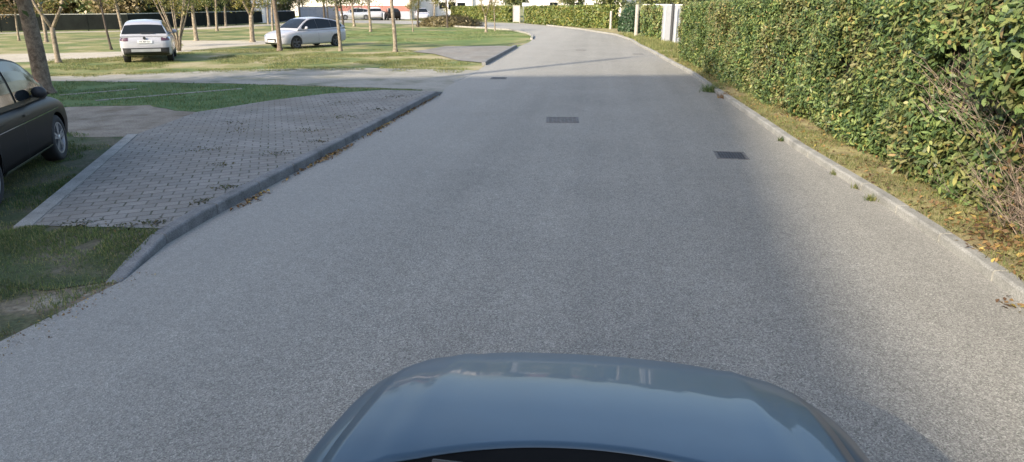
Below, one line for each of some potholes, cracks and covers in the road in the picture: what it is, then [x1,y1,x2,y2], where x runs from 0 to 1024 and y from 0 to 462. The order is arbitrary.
drain grate [713,151,750,160]
